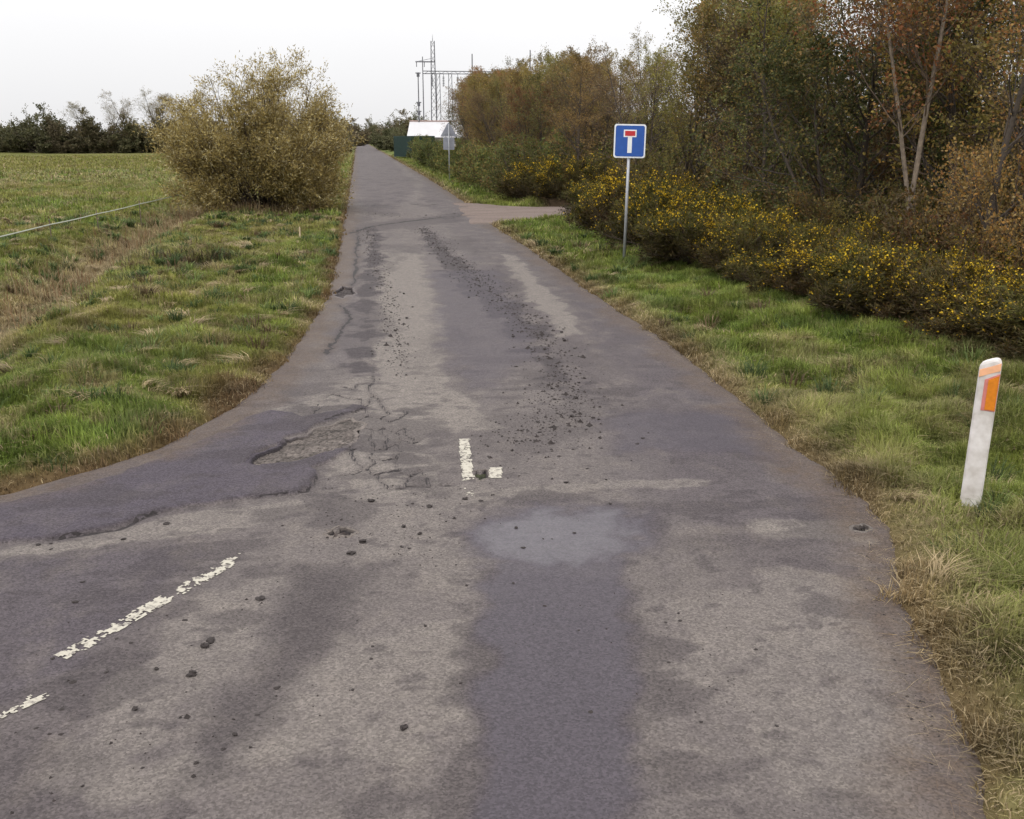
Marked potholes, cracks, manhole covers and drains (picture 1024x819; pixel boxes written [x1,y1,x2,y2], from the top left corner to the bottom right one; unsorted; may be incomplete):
crack [313,376,452,490]
crack [323,204,454,355]
pothole [332,286,358,299]
pothole [849,523,873,533]
pothole [245,418,367,466]
